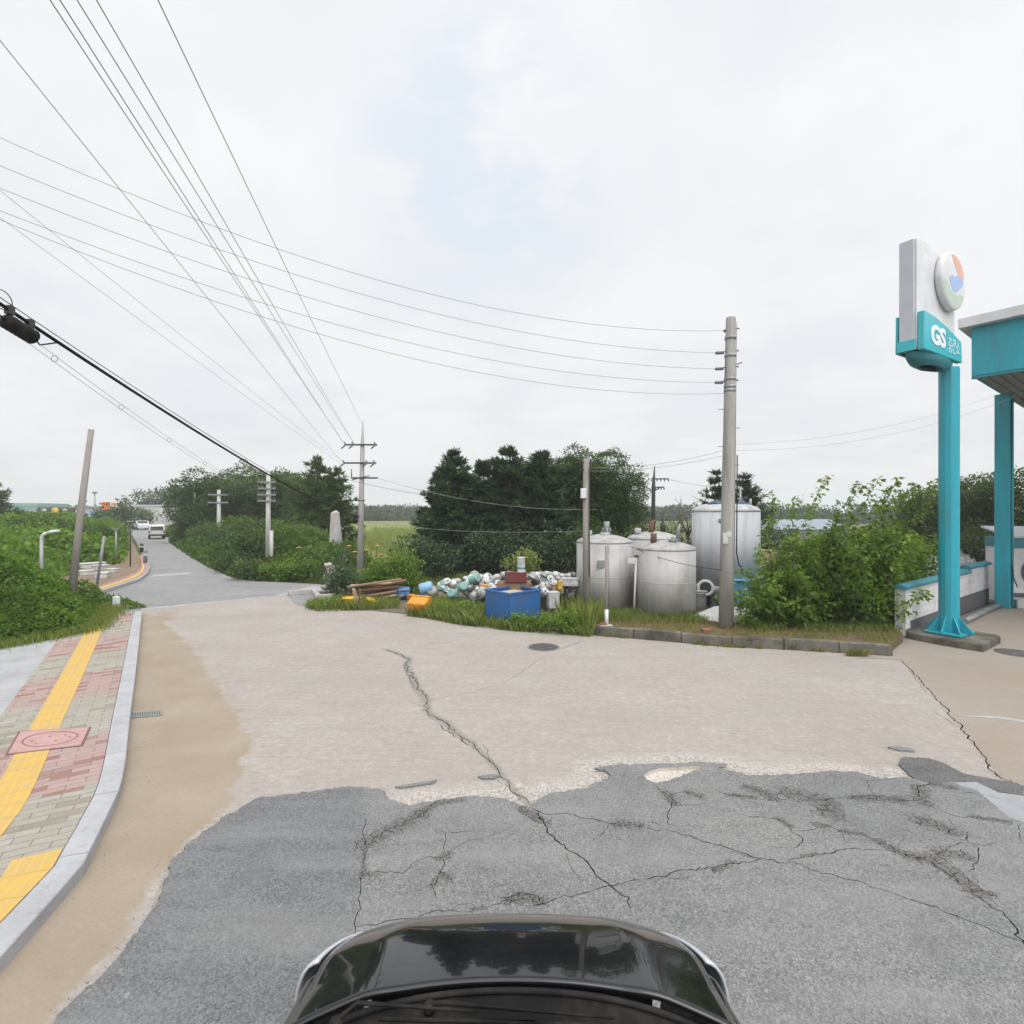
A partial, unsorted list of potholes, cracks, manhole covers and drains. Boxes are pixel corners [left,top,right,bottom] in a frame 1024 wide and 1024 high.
manhole cover [994,648,1024,657]
drain grate [131,710,162,718]
manhole cover [5,727,91,756]
manhole cover [527,643,560,652]
crack [357,642,1024,944]
